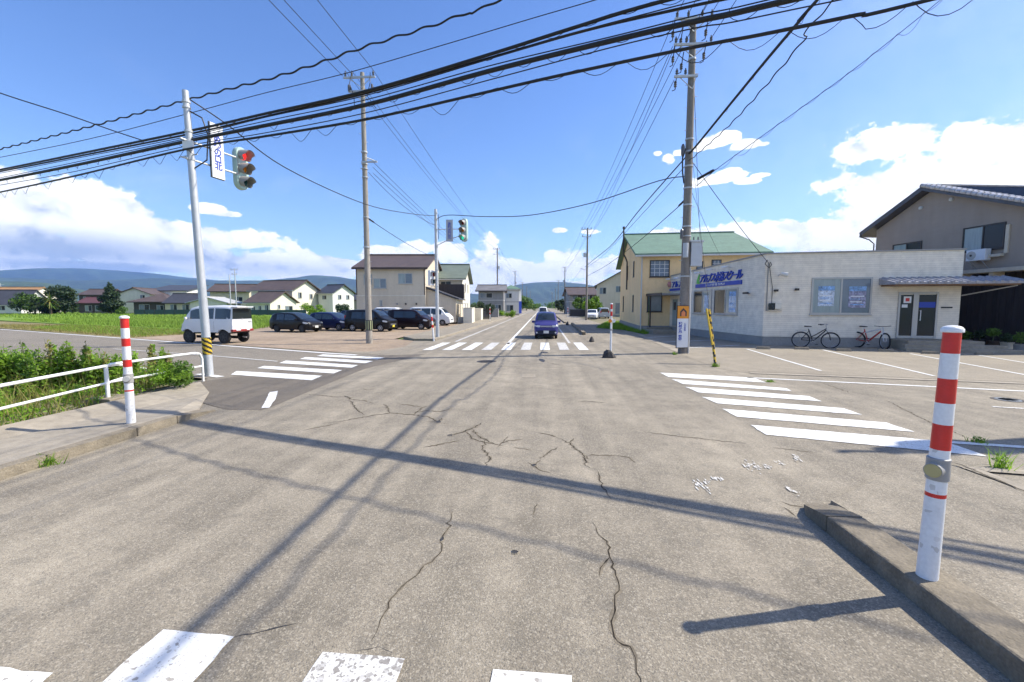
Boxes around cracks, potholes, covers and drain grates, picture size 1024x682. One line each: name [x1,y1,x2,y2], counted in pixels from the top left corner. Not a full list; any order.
crack [592,521,641,680]
crack [363,513,452,652]
crack [306,389,635,499]
